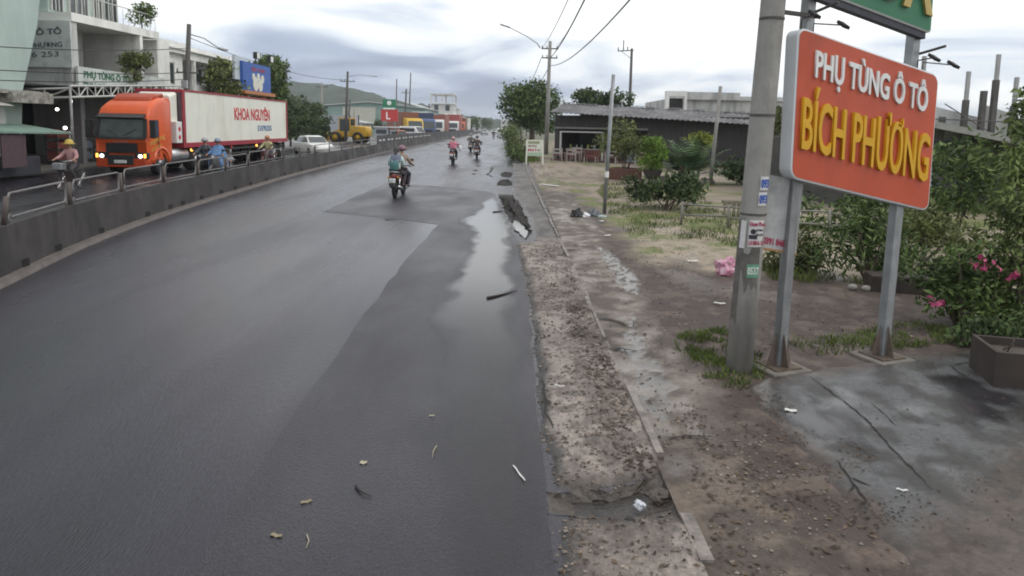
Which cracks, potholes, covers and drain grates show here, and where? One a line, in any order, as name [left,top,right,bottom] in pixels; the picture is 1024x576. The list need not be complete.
crack [810,376,931,503]
pothole [497,194,533,240]
